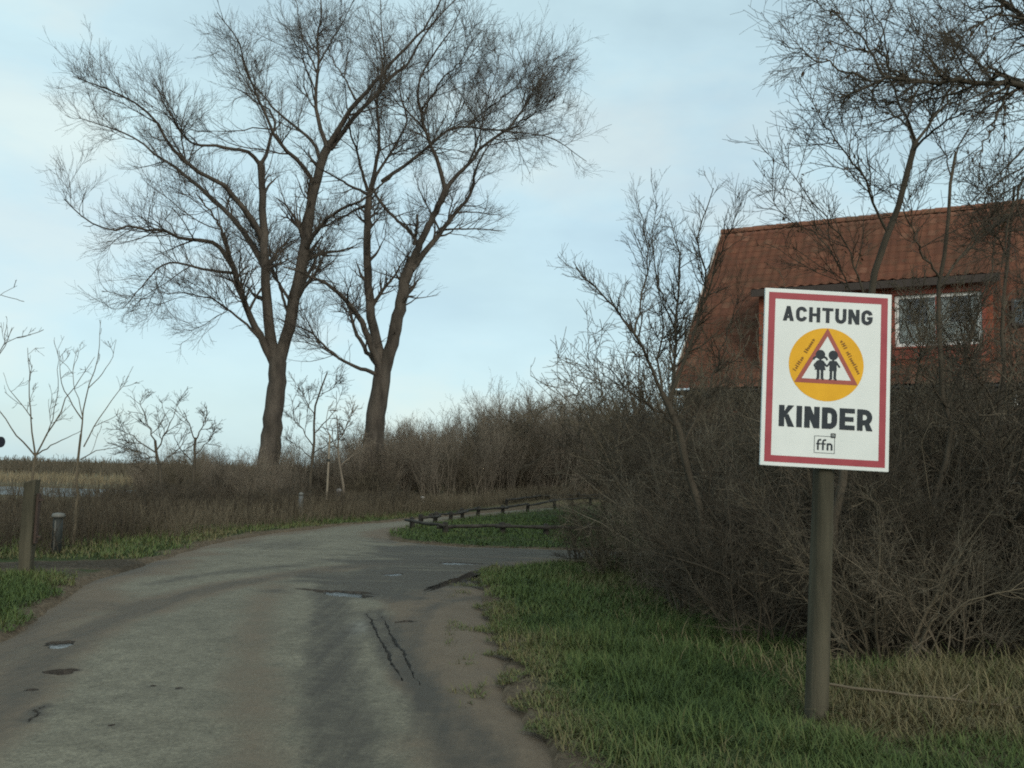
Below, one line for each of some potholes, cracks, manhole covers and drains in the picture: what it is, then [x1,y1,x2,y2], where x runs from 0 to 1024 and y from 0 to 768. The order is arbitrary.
pothole [295,588,381,598]
pothole [44,640,76,649]
